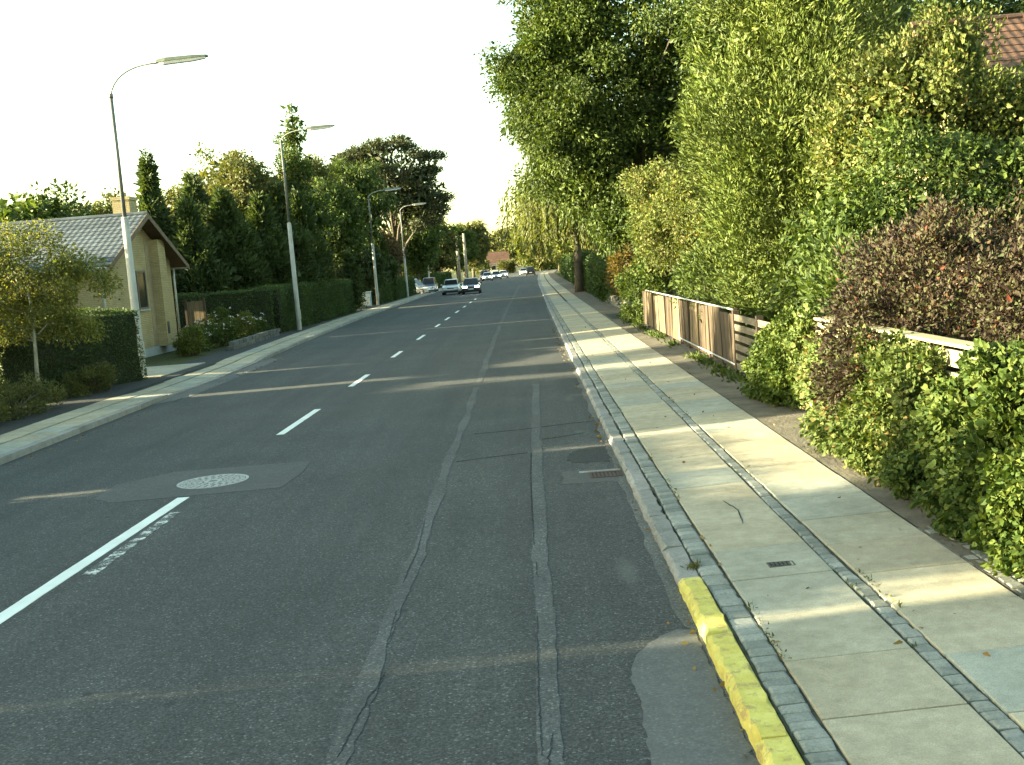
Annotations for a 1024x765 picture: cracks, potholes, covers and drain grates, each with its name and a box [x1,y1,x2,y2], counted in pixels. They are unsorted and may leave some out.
manhole cover [177,474,249,489]
